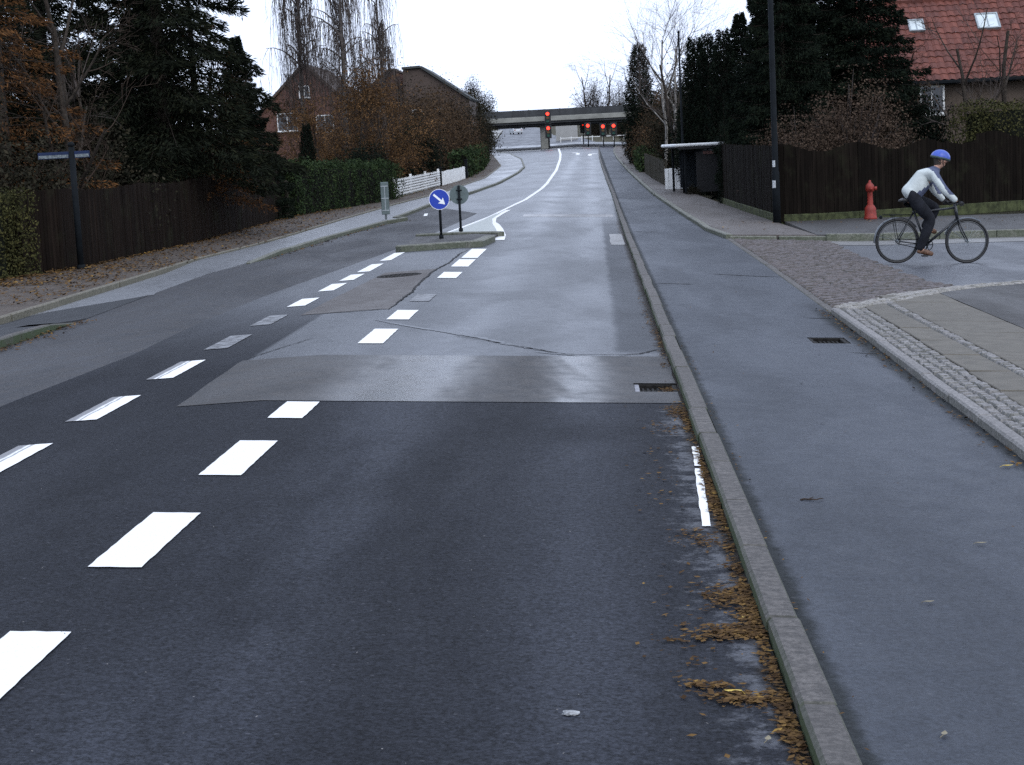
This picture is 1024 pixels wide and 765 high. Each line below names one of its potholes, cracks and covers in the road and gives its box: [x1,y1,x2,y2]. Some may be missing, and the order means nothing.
drain grate [634,384,682,395]
crack [332,250,657,356]
